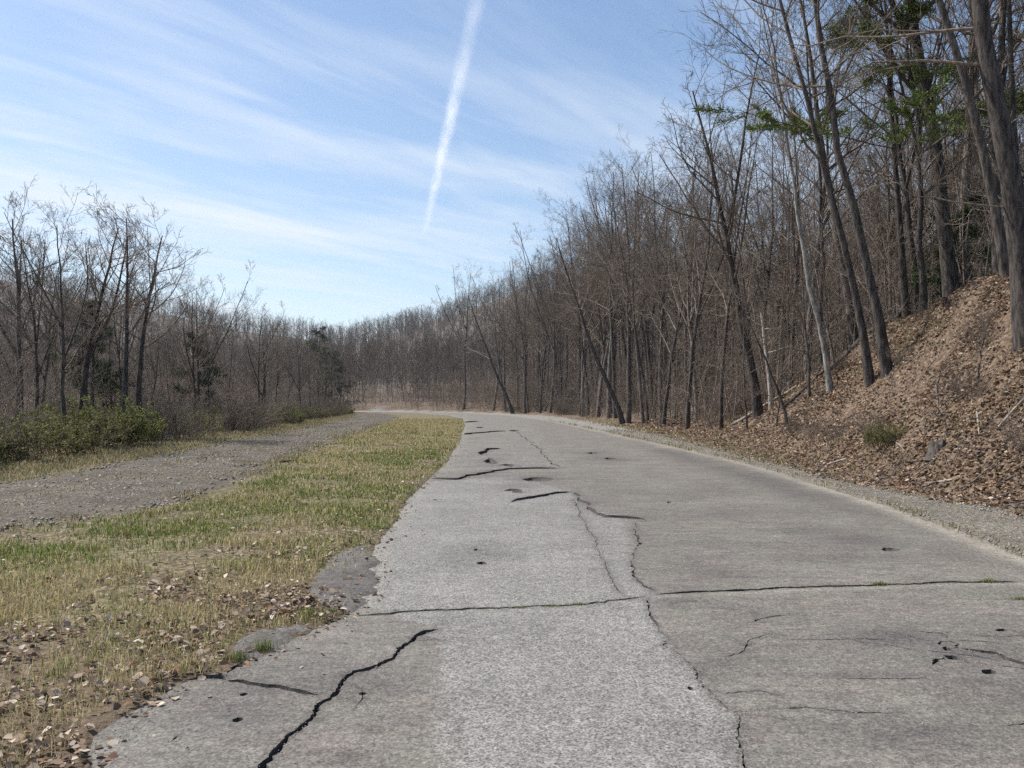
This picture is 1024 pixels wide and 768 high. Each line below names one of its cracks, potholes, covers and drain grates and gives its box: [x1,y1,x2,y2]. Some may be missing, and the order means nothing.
crack [433,421,888,768]
crack [185,629,439,768]
